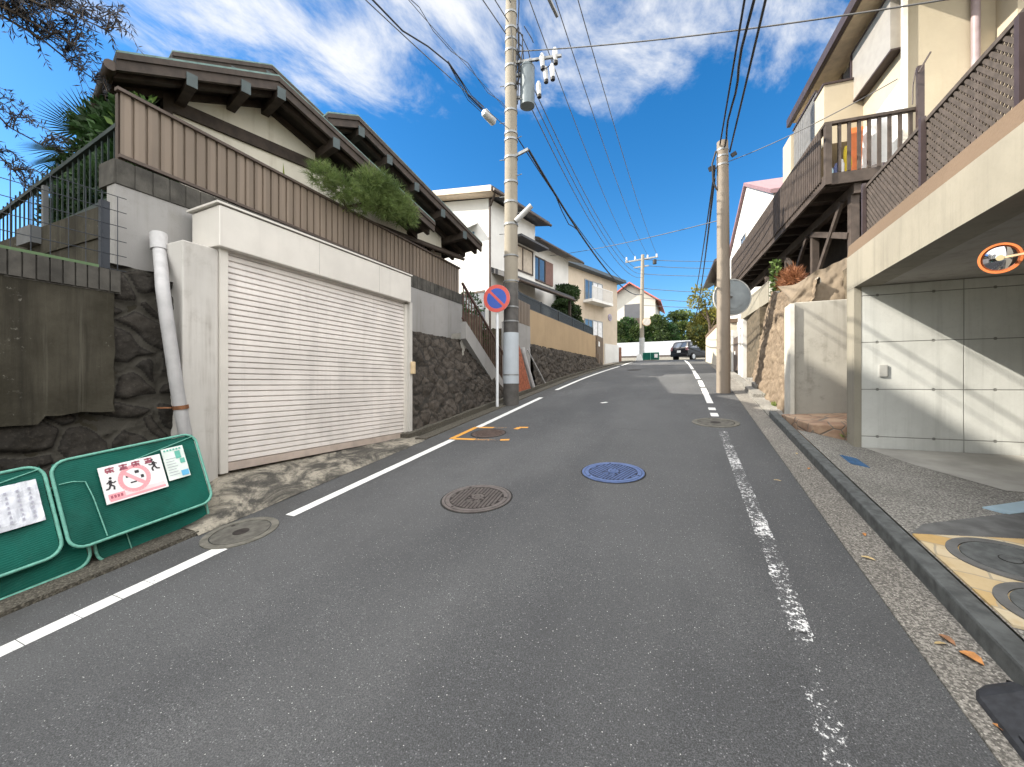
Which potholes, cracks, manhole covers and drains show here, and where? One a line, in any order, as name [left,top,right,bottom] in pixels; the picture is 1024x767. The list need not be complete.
manhole cover [471,429,506,438]
manhole cover [199,517,279,550]
manhole cover [440,485,513,514]
manhole cover [581,462,646,484]
manhole cover [692,418,740,428]
